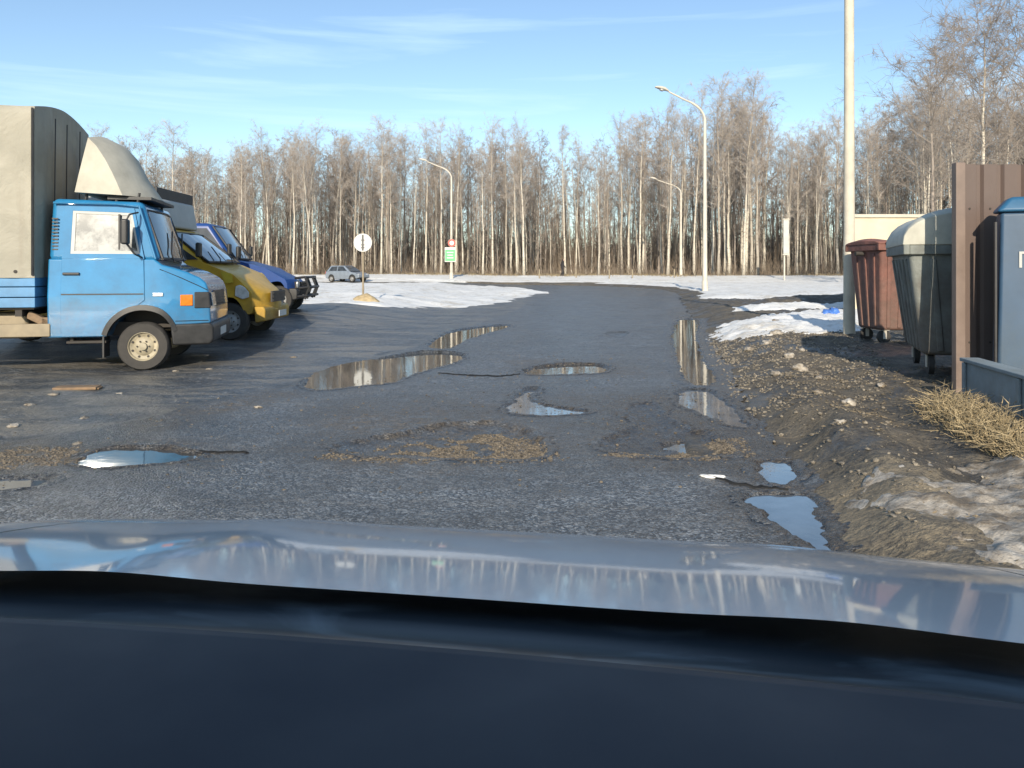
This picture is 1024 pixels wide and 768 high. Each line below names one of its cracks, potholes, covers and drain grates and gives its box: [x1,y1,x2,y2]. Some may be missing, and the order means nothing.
pothole [725,489,863,553]
pothole [320,418,559,463]
crack [714,476,789,491]
pothole [516,362,616,376]
pothole [64,442,214,470]
pothole [418,324,517,350]
pothole [497,385,597,417]
pothole [297,350,469,391]
pothole [662,318,738,387]
pothole [666,386,765,429]
pothole [740,457,817,488]
pothole [590,400,748,461]
